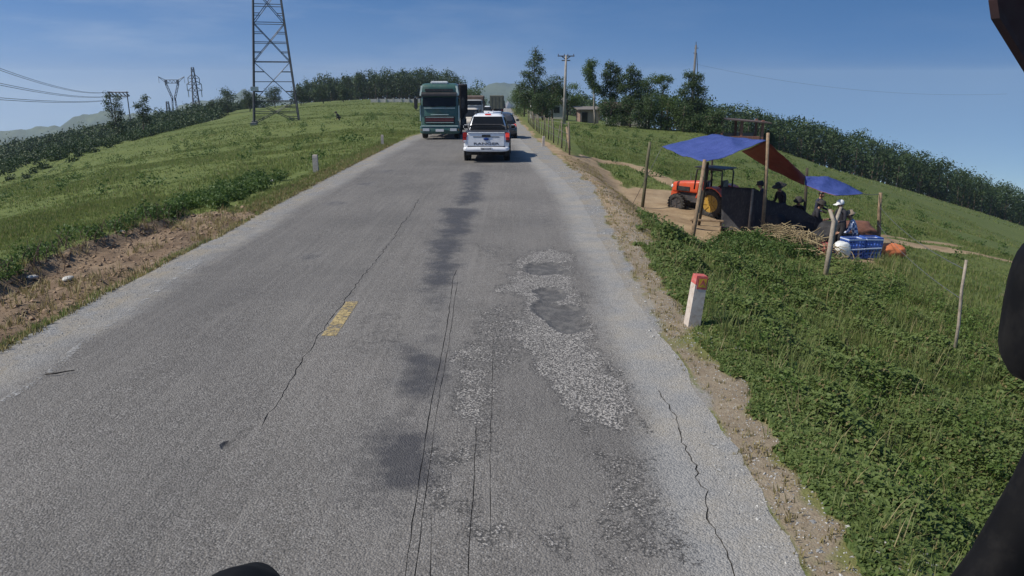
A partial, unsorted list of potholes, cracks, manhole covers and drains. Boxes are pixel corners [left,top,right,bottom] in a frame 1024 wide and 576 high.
crack [658,390,735,576]
crack [262,201,419,425]
